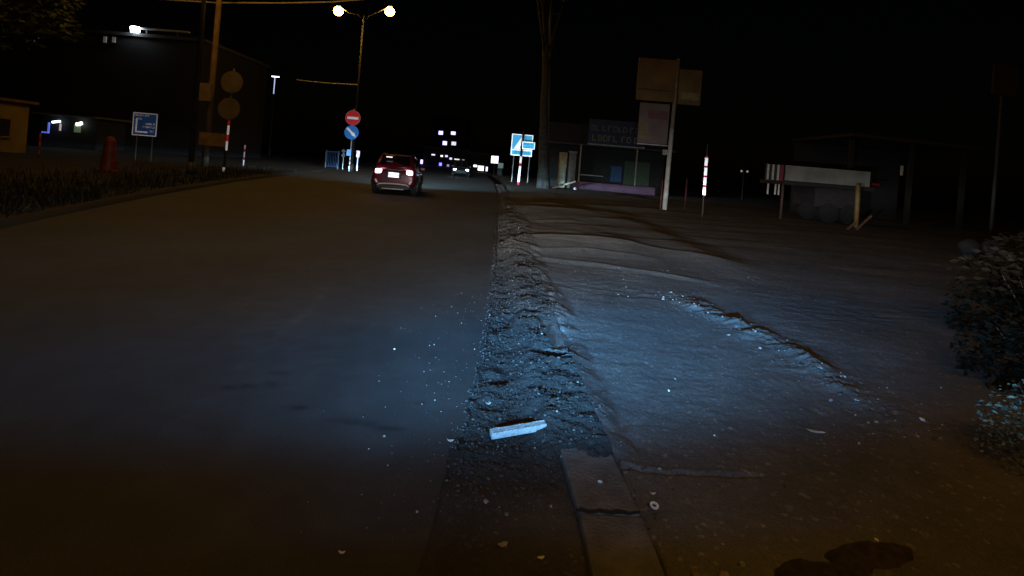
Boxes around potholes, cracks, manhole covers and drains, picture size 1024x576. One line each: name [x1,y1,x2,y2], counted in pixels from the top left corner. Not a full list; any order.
crack [576,507,640,515]
